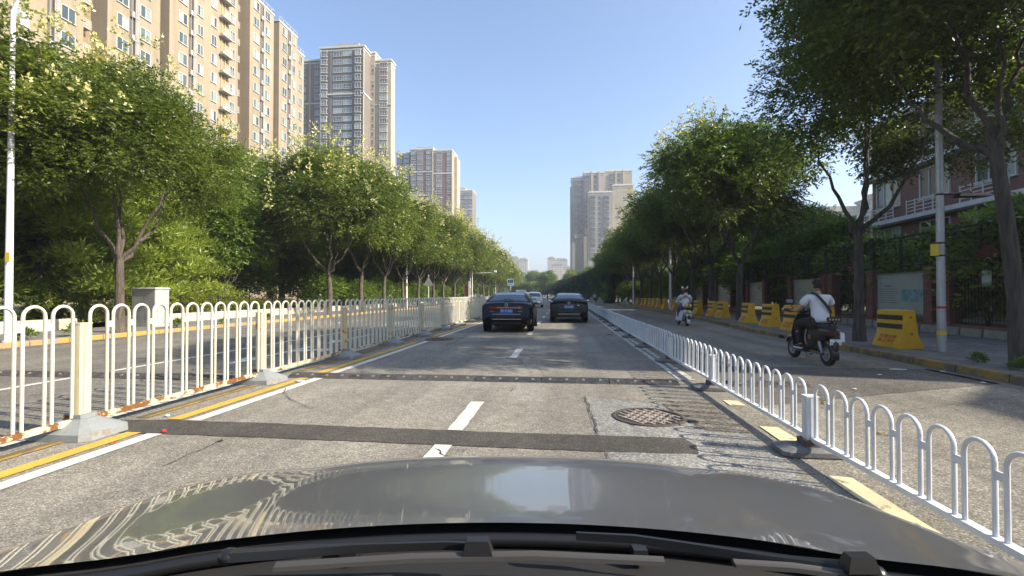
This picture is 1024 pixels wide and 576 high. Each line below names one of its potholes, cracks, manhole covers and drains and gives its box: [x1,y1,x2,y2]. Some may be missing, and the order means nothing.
manhole cover [613,408,687,427]
